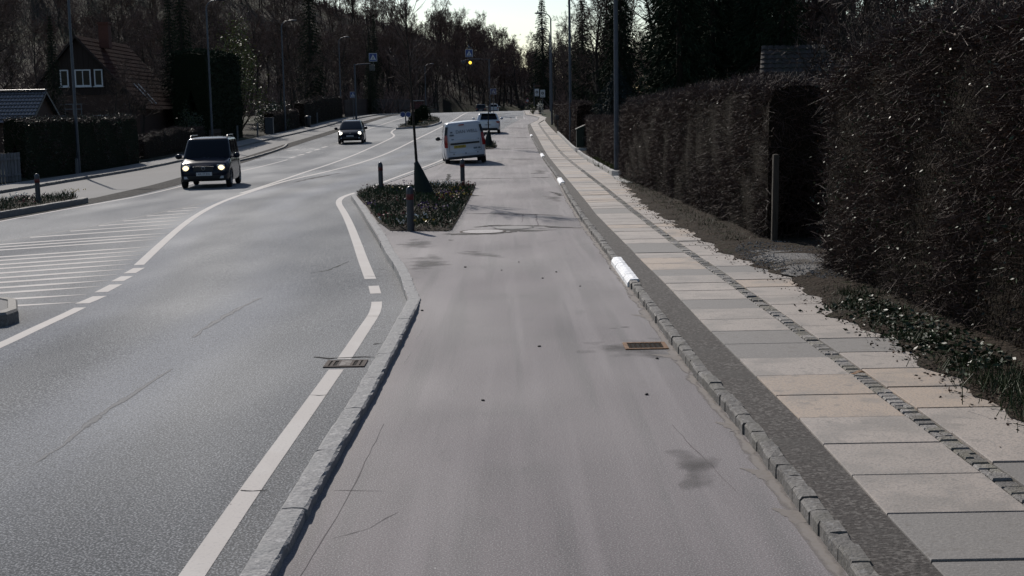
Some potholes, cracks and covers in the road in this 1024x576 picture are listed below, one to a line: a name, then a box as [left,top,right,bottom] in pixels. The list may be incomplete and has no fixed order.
crack [300,424,394,576]
